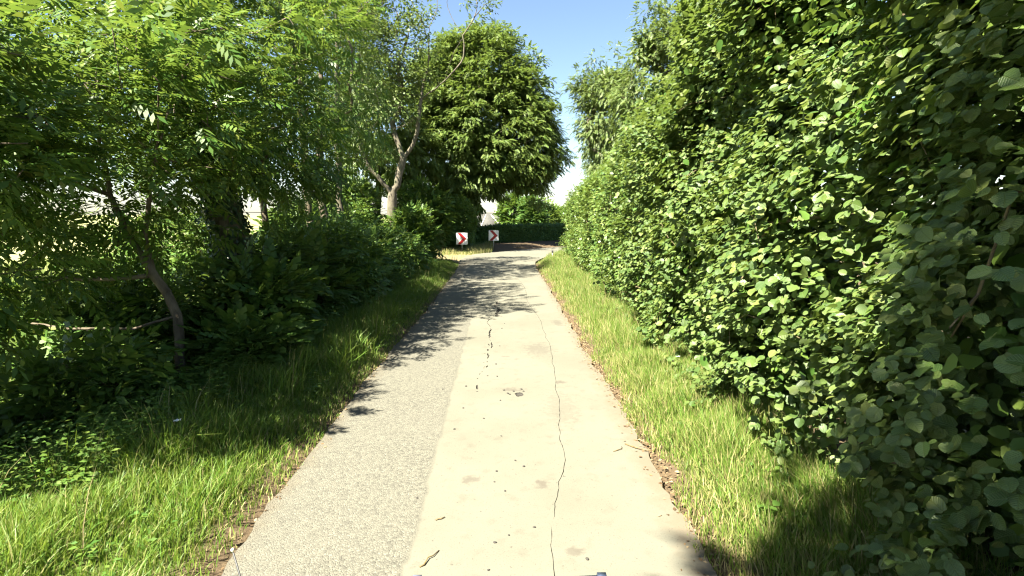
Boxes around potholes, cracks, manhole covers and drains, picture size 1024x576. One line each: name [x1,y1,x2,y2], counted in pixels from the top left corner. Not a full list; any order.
crack [476,301,501,392]
crack [524,287,566,576]
